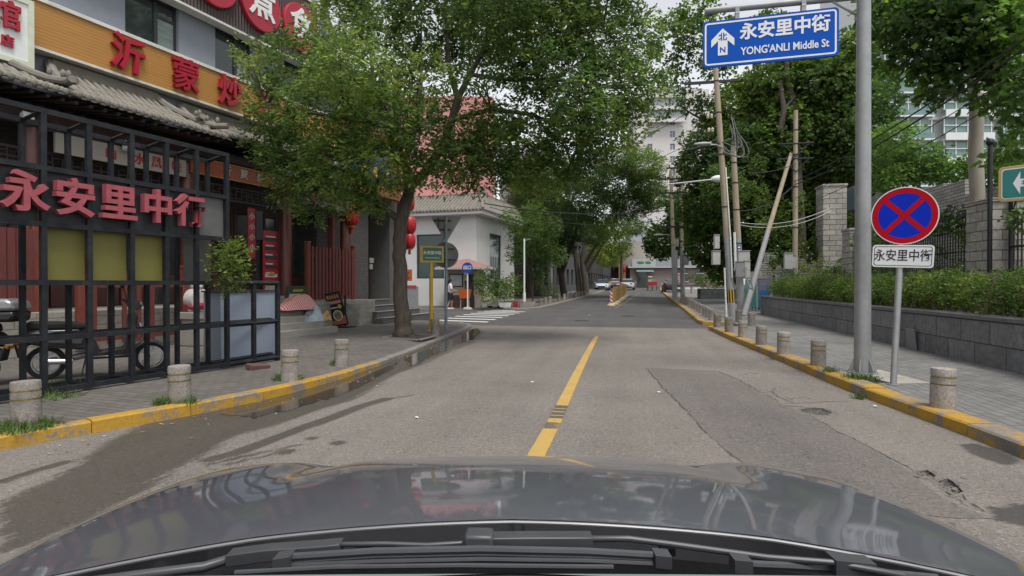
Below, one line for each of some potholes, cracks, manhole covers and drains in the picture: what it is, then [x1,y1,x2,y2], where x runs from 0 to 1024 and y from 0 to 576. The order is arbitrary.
crack [745,373,913,471]
pothole [931,477,969,497]
crack [645,368,744,463]
pothole [912,469,944,481]
